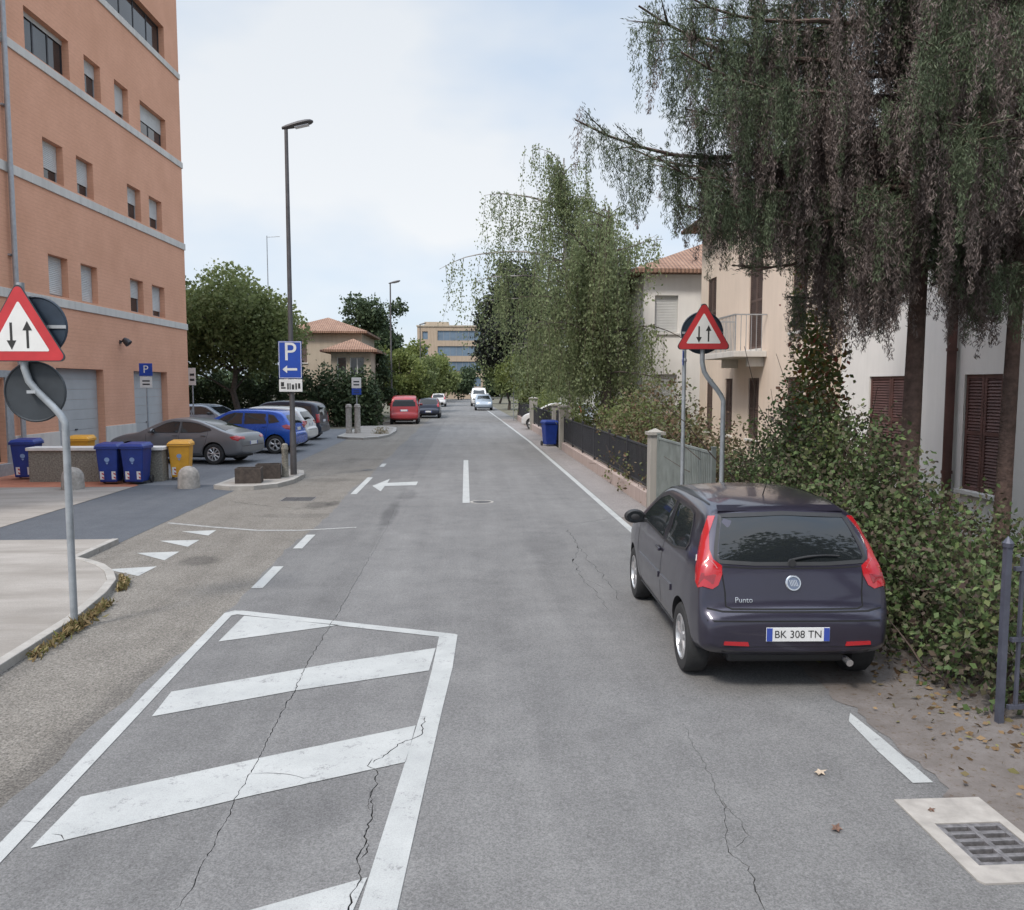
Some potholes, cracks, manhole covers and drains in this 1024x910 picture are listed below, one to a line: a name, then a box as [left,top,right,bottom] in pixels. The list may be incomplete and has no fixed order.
crack [348,718,425,910]
crack [569,518,617,611]
crack [175,528,387,910]
crack [688,731,765,910]
drain grate [894,797,1024,885]
